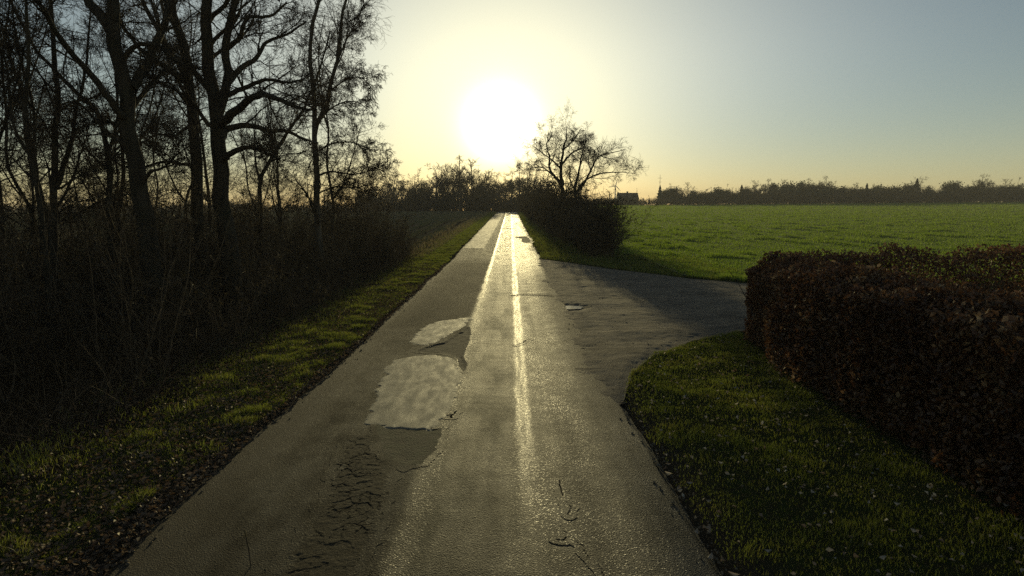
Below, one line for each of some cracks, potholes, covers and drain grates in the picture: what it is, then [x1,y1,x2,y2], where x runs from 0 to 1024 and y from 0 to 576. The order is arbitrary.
crack [548,478,617,576]
crack [261,433,403,576]
